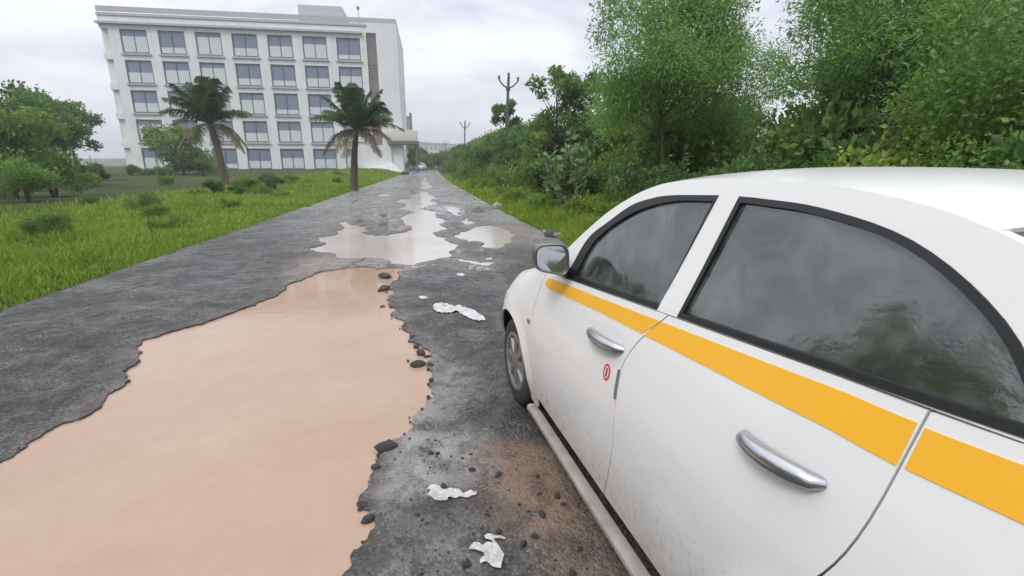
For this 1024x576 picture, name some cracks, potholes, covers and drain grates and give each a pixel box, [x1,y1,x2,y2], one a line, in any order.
pothole [444,206,464,216]
pothole [0,266,435,576]
pothole [308,191,460,265]
pothole [454,225,516,249]
